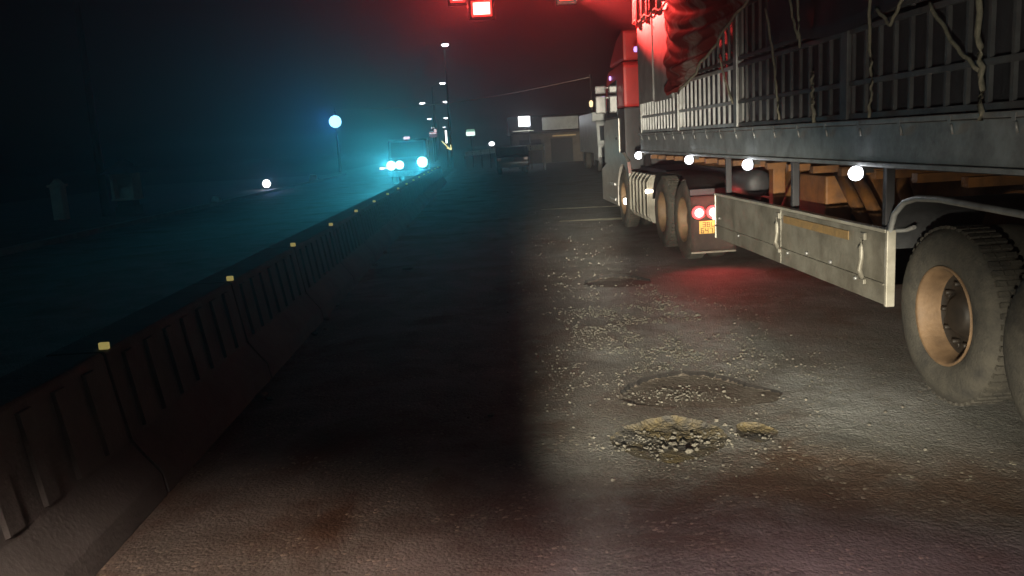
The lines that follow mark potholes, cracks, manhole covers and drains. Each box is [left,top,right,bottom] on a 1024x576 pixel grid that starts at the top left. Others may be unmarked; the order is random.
pothole [583,274,652,288]
pothole [610,415,729,464]
pothole [618,371,783,408]
